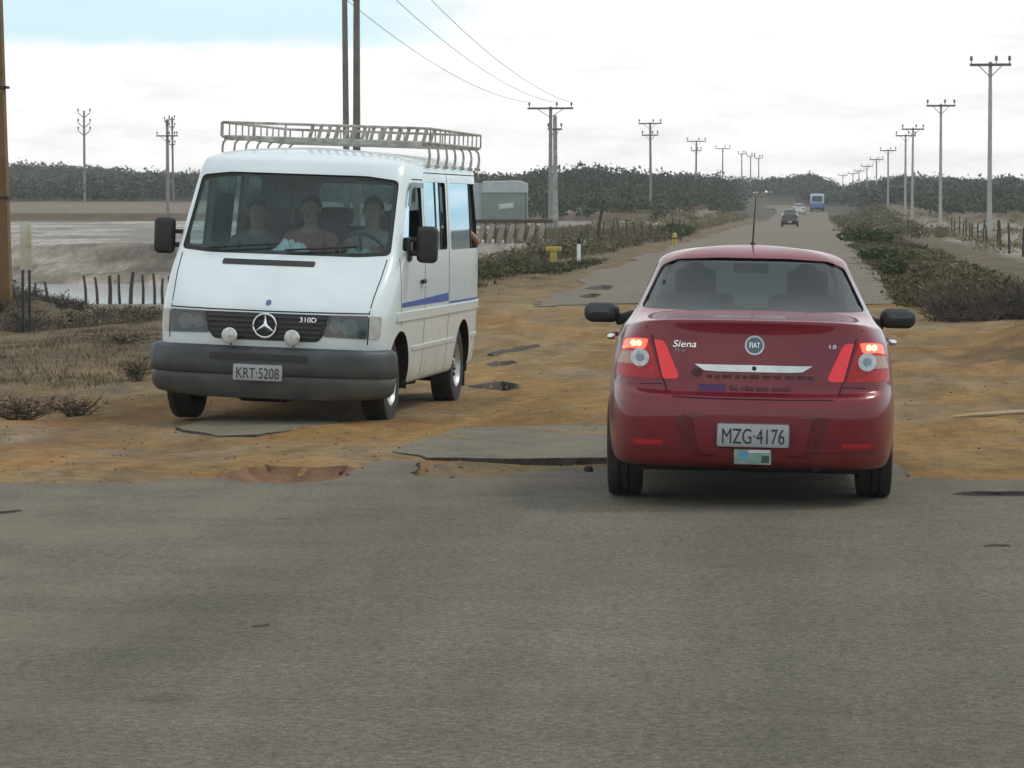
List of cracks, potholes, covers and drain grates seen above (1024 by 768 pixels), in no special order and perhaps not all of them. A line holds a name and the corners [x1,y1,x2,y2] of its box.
pothole [468,381,520,391]
pothole [219,465,354,483]
